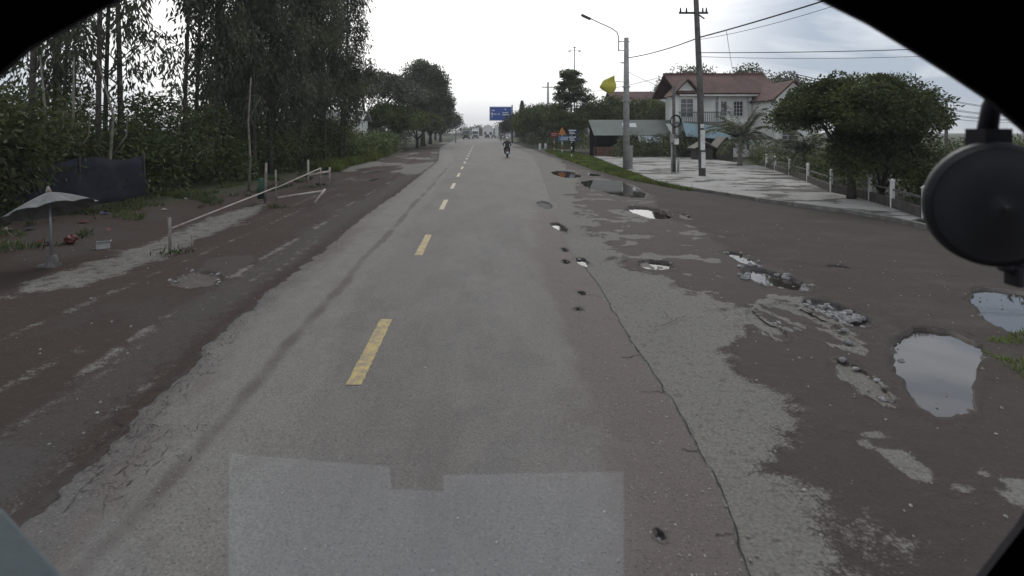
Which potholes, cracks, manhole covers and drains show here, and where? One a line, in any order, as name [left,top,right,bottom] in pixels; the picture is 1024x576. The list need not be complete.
pothole [532,200,559,211]
pothole [796,297,881,330]
pothole [545,170,590,179]
pothole [629,258,683,272]
pothole [870,323,999,426]
pothole [734,262,819,294]
pothole [574,257,593,268]
pothole [573,178,655,200]
pothole [649,526,671,546]
pothole [548,222,572,234]
